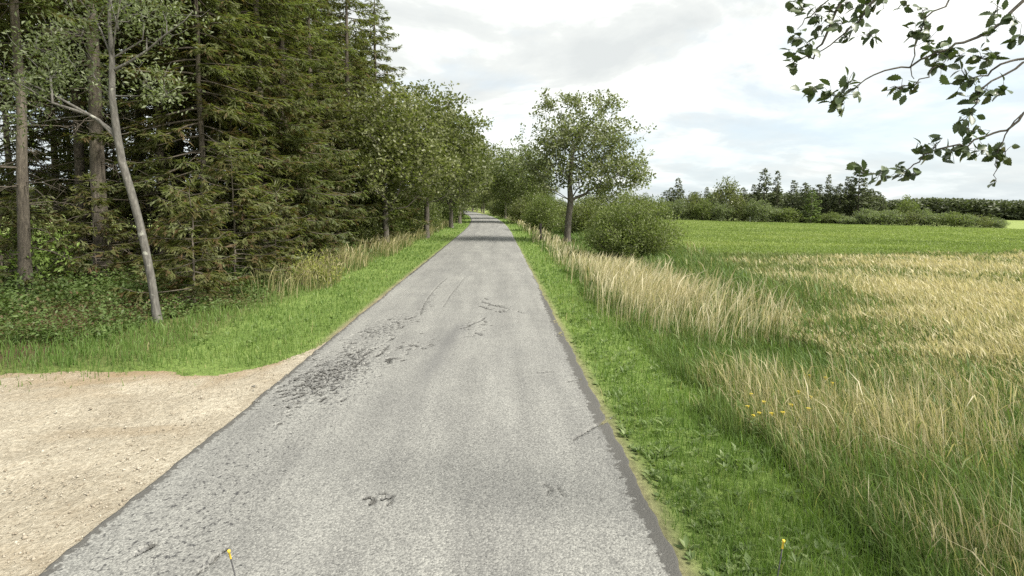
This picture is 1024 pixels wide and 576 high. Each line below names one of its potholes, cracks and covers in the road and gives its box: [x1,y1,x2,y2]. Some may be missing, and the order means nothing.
crack [463,298,522,337]
crack [252,277,465,425]
